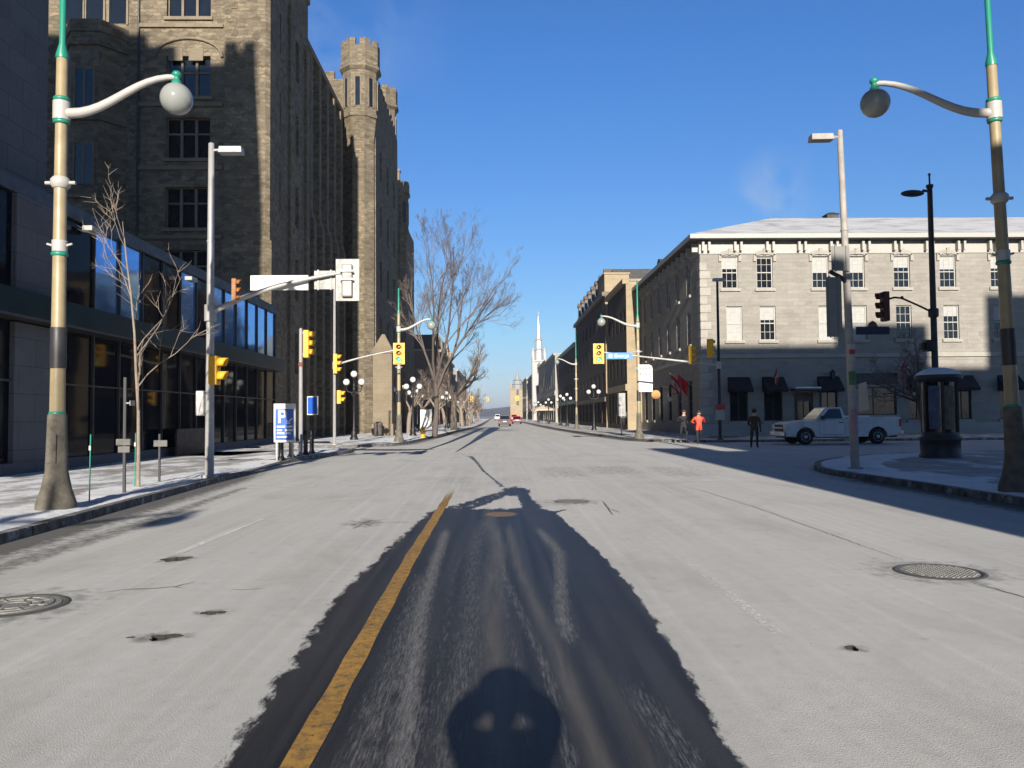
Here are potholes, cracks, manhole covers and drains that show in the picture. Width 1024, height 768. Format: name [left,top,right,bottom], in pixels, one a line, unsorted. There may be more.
crack [696,489,1023,597]
manhole cover [0,594,72,618]
manhole cover [892,563,989,581]
